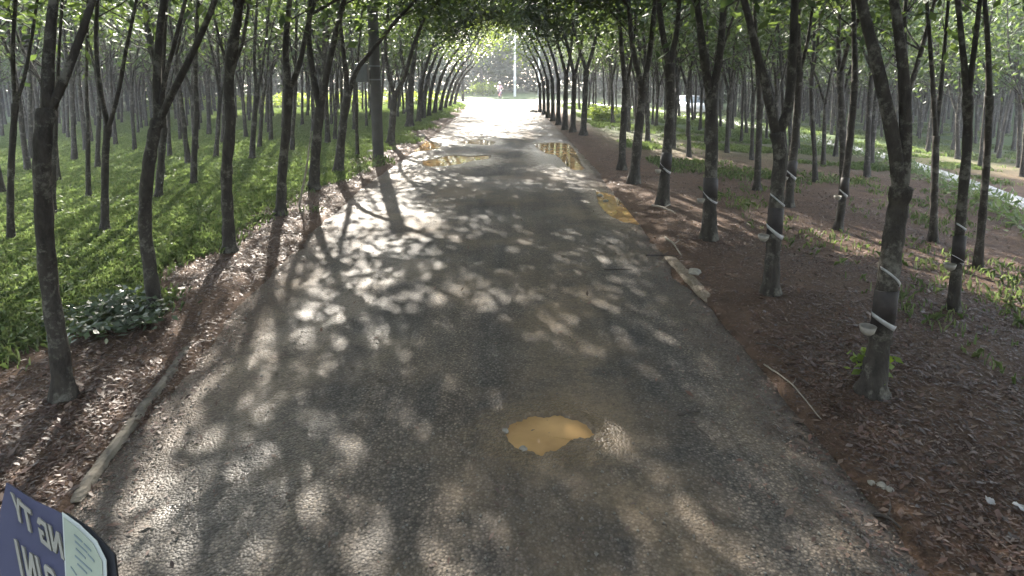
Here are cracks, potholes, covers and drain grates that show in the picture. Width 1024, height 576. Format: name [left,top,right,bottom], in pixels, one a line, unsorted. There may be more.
pothole [420,155,491,167]
pothole [532,142,586,171]
pothole [502,410,597,456]
